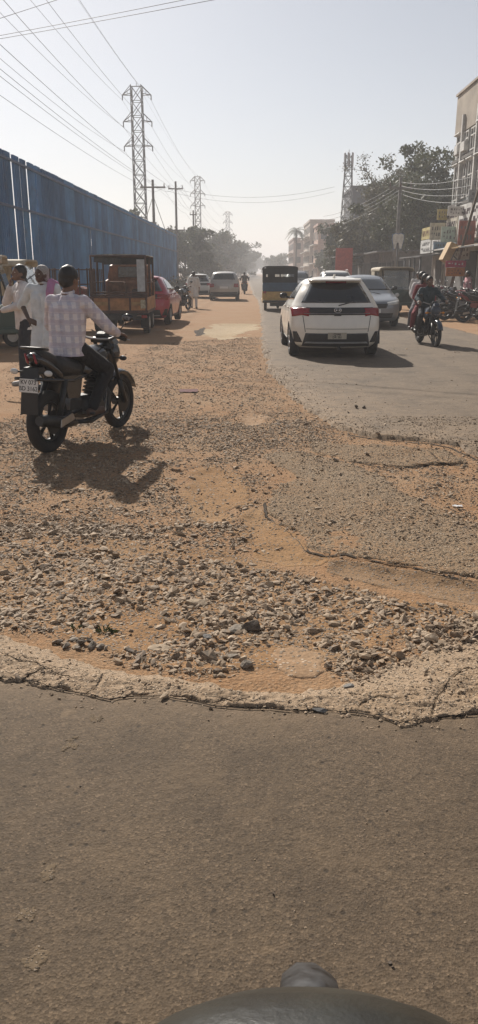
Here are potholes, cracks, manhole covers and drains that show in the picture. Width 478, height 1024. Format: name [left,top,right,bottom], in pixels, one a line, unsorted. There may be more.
pothole [237,411,271,427]
pothole [0,531,473,672]
crack [350,435,476,468]
pothole [203,323,261,340]
pothole [271,647,324,679]
pothole [178,465,254,524]
crack [263,503,473,582]
